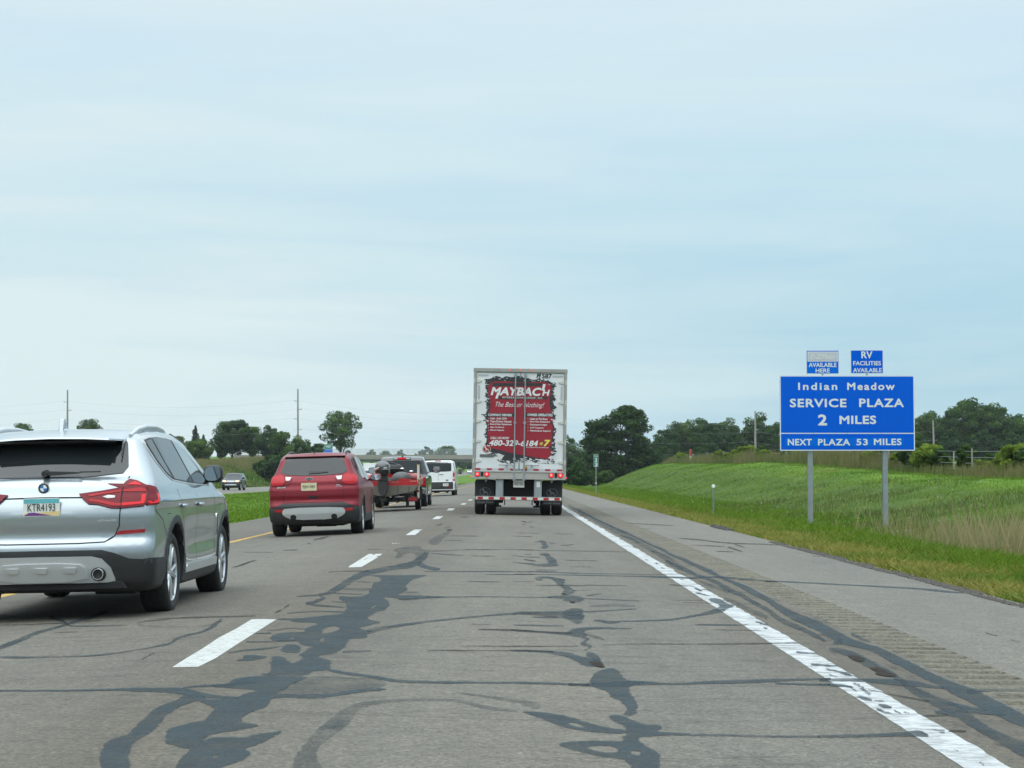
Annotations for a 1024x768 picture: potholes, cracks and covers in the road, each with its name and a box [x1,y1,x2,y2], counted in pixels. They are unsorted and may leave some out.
pothole [871,667,896,676]
